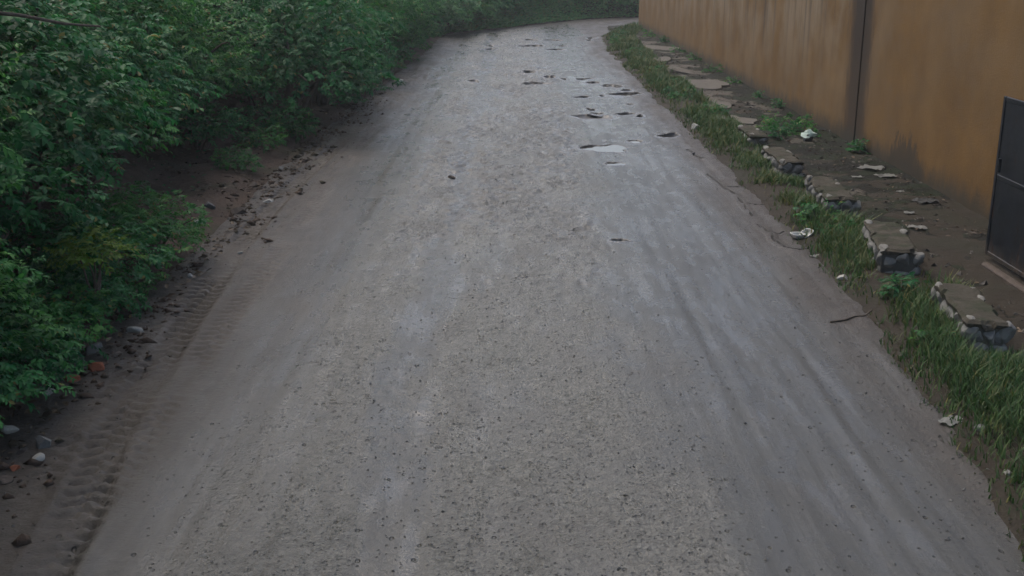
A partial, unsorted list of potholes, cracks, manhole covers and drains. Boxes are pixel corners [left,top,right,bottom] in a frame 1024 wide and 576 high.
crack [683,149,809,252]
pothole [576,144,630,153]
